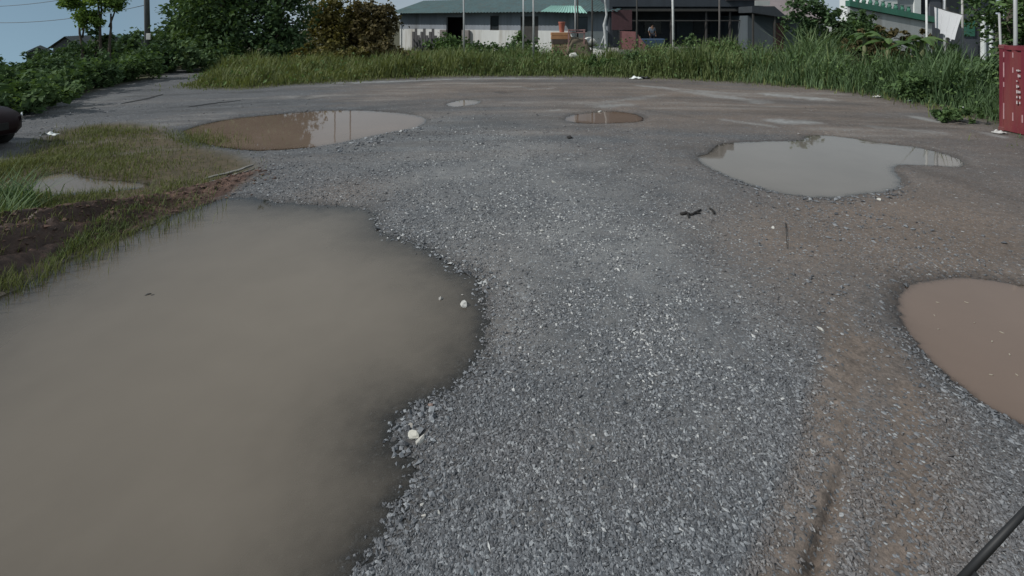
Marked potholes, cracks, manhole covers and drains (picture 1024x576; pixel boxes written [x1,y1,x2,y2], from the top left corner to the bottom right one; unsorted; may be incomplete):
pothole [168,106,439,152]
pothole [439,98,489,107]
pothole [680,130,986,202]
pothole [858,257,1024,442]
pothole [551,107,656,125]
pothole [0,180,554,576]
